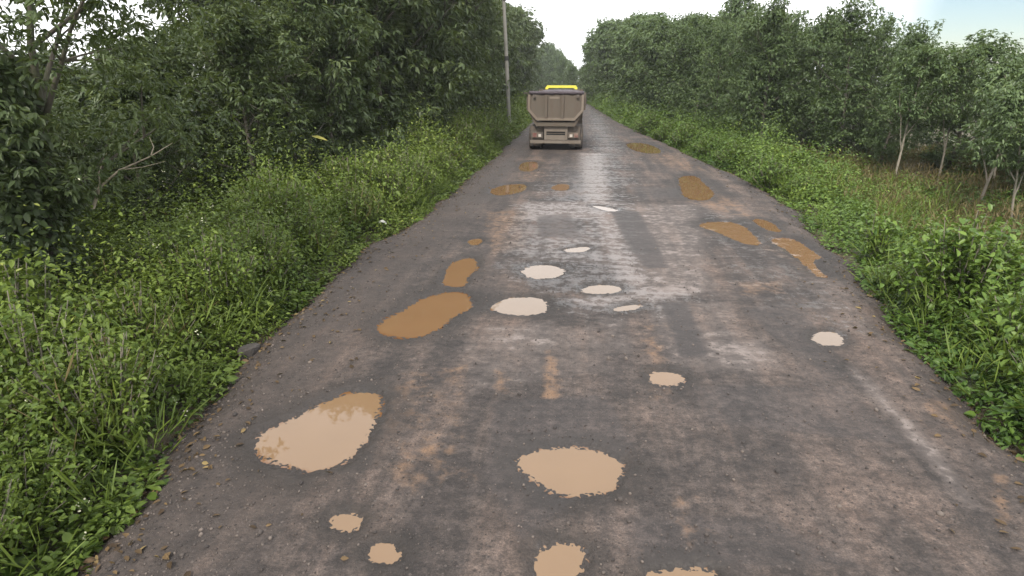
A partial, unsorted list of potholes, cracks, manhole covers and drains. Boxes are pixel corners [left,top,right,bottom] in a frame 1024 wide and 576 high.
pothole [319,504,372,536]
pothole [805,327,852,347]
pothole [623,142,664,154]
pothole [523,533,598,576]
pothole [642,366,693,388]
pothole [486,183,531,196]
pothole [693,219,769,246]
pothole [629,554,731,576]
pothole [357,533,411,568]
pothole [483,293,557,317]
pothole [435,255,485,288]
pothole [576,282,627,295]
